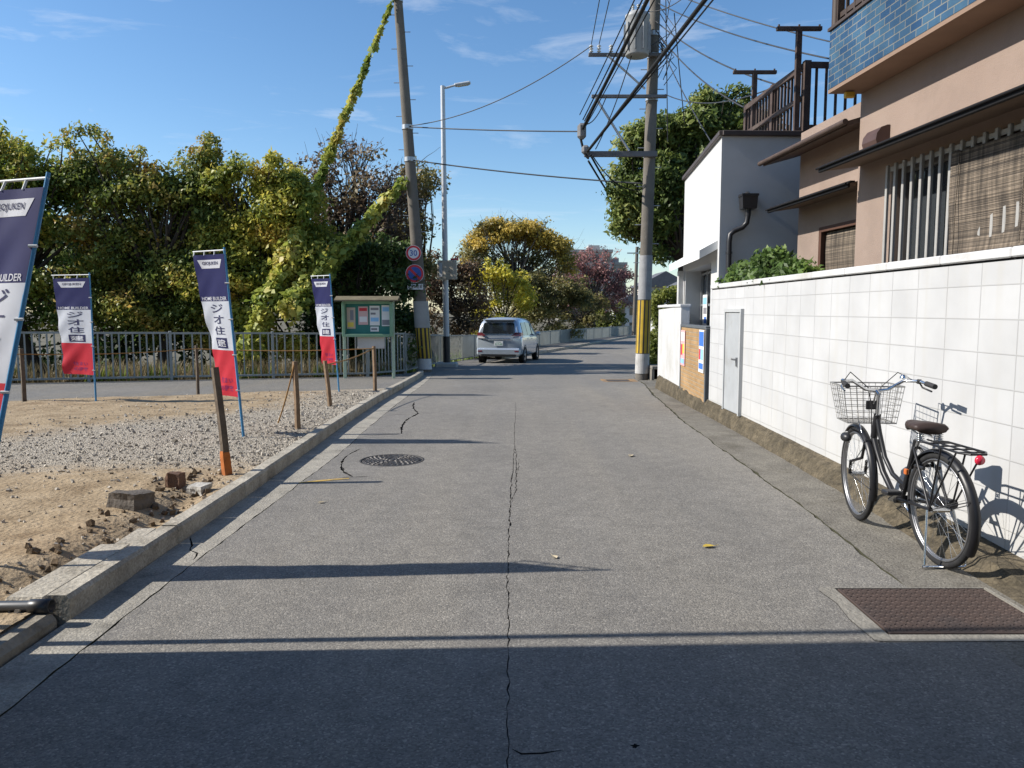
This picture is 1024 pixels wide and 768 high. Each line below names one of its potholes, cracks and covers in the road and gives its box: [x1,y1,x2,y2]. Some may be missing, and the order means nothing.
manhole cover [359,454,424,467]
crack [506,403,561,768]
manhole cover [819,587,1024,642]
crack [340,403,419,478]
